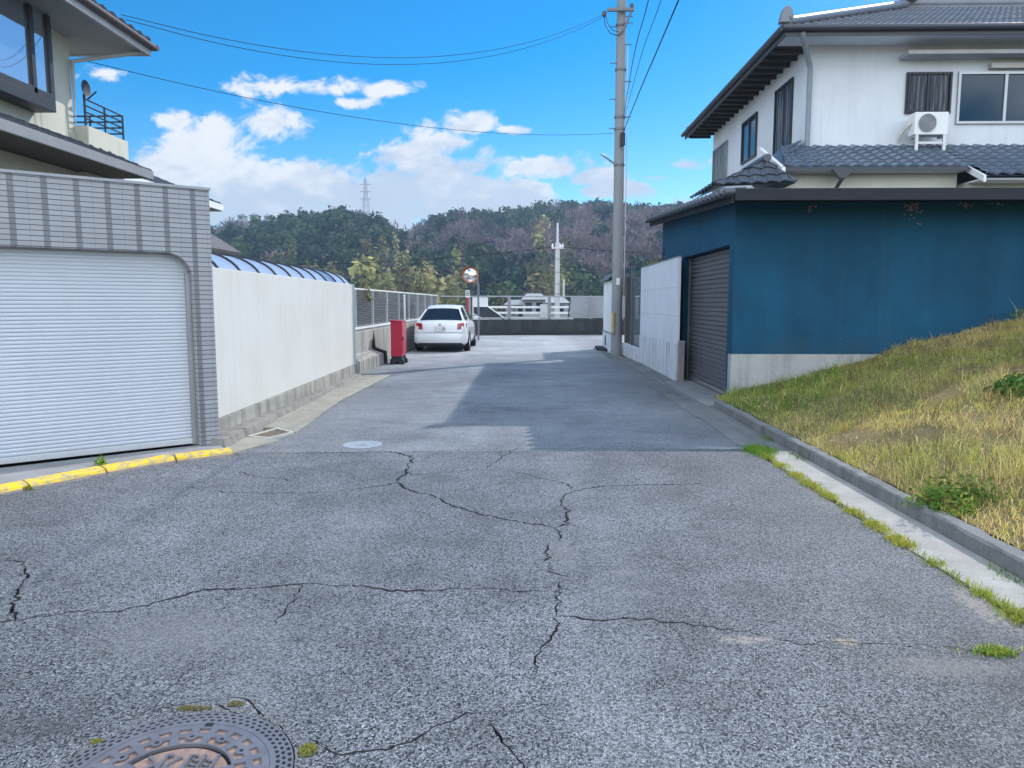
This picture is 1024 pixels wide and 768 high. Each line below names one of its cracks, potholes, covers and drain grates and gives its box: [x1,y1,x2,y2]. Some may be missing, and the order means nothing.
drain grate [248,427,294,440]
crack [152,697,525,768]
manhole cover [60,712,294,768]
crack [0,448,970,673]
